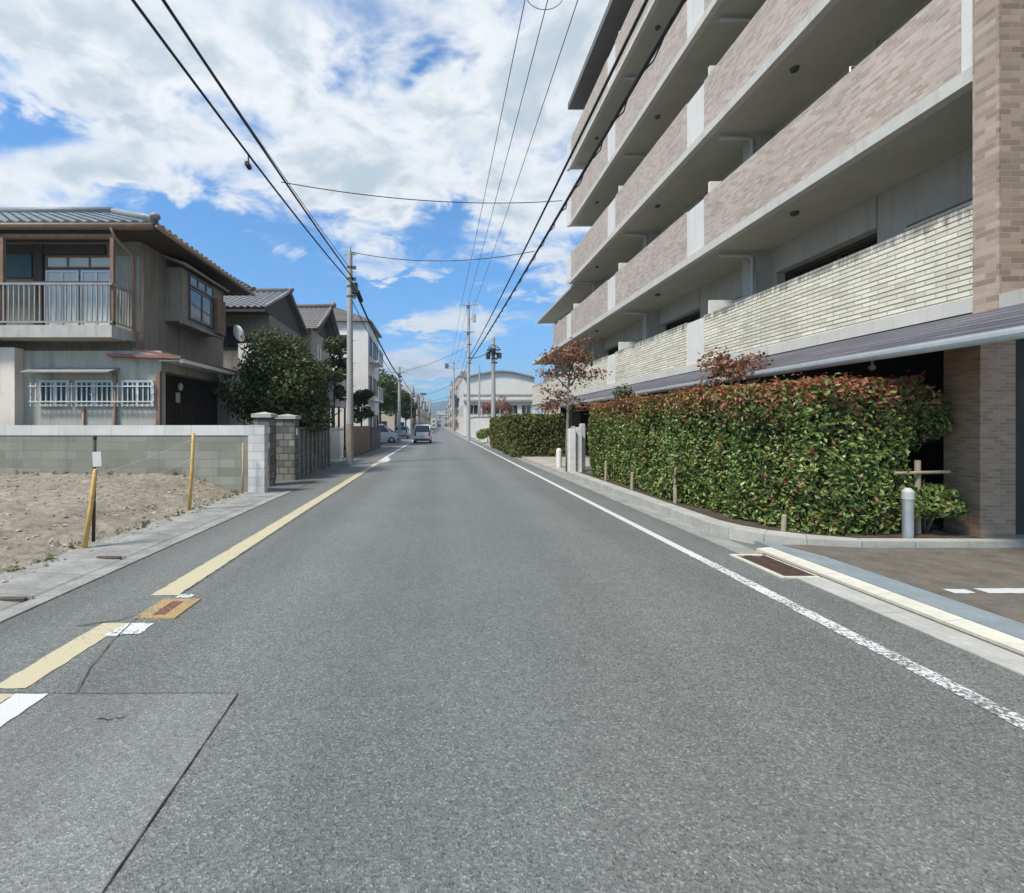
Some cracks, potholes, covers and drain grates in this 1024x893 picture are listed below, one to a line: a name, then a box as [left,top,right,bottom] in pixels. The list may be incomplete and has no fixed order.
drain grate [729,554,821,579]
manhole cover [134,599,201,619]
